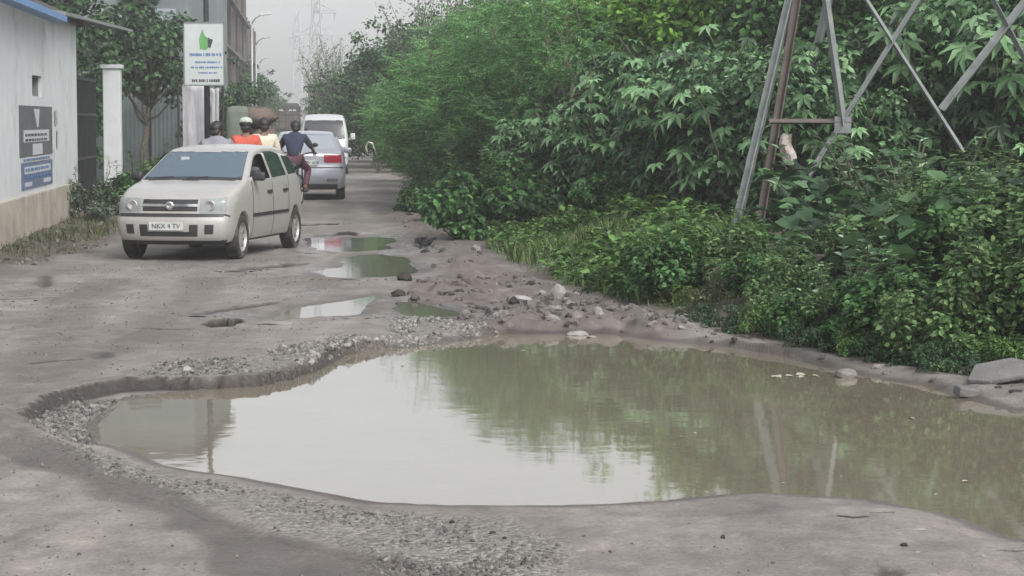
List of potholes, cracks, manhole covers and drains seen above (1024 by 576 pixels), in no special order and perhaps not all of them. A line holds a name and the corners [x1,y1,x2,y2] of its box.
pothole [266,231,420,254]
pothole [214,289,433,325]
pothole [0,316,1024,576]
pothole [266,250,464,281]
